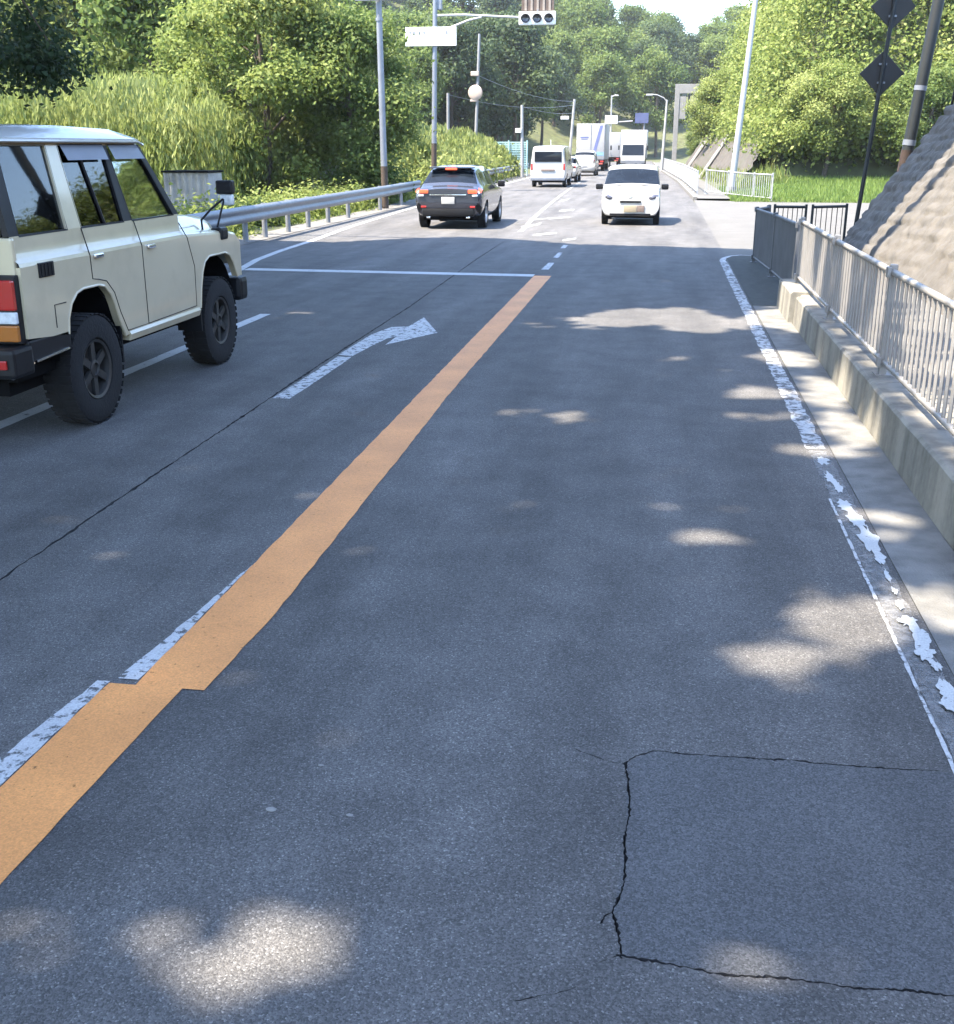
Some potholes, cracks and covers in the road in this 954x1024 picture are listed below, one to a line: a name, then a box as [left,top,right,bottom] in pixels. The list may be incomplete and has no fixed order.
crack [574,748,953,997]
